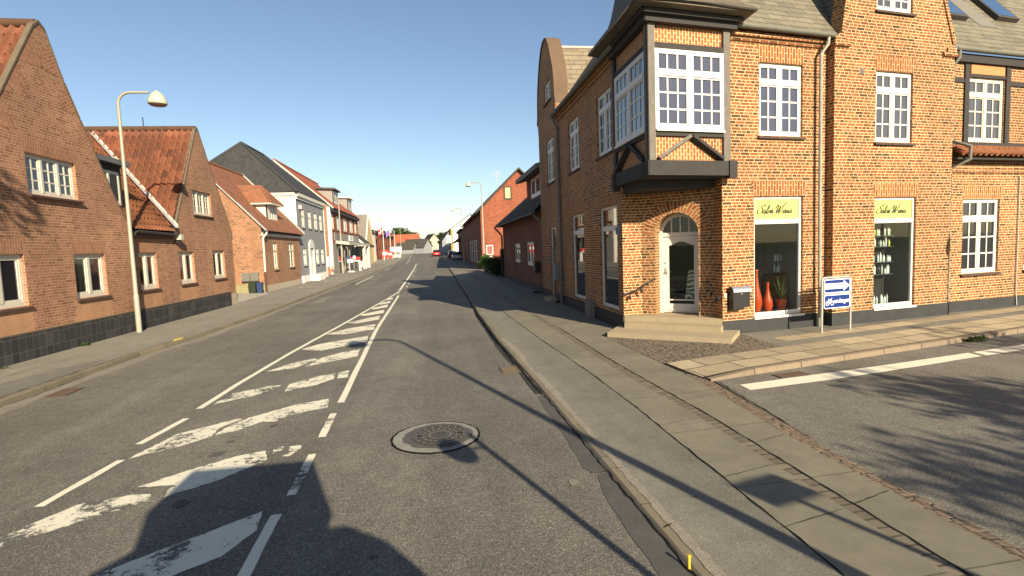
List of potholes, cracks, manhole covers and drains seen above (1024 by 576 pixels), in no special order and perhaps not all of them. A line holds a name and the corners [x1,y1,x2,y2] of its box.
manhole cover [390,421,480,454]
drain grate [499,365,521,373]
drain grate [45,387,85,397]
